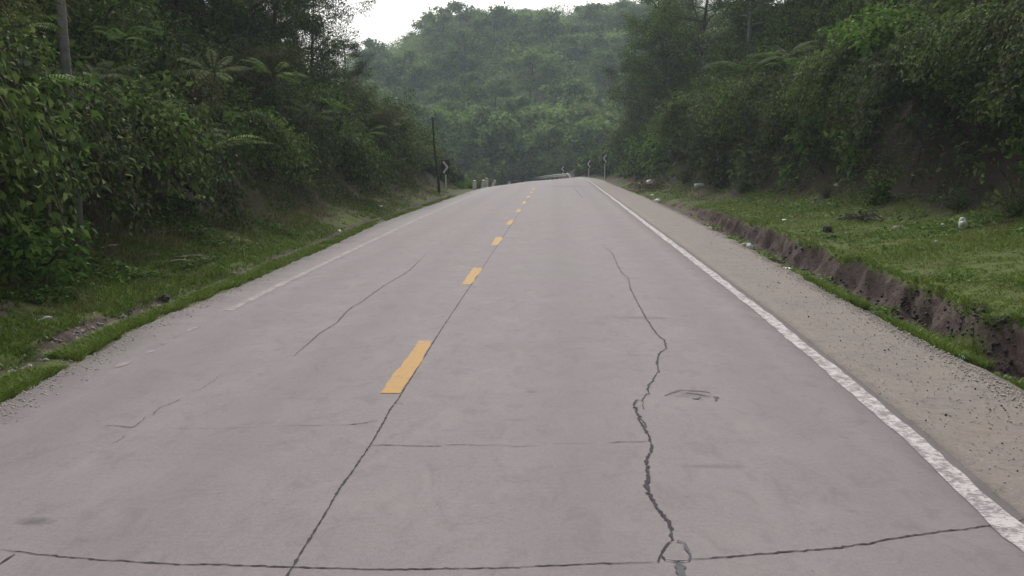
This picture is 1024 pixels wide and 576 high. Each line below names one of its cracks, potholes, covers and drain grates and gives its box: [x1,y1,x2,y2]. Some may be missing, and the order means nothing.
crack [294,255,425,356]
crack [373,245,735,576]
